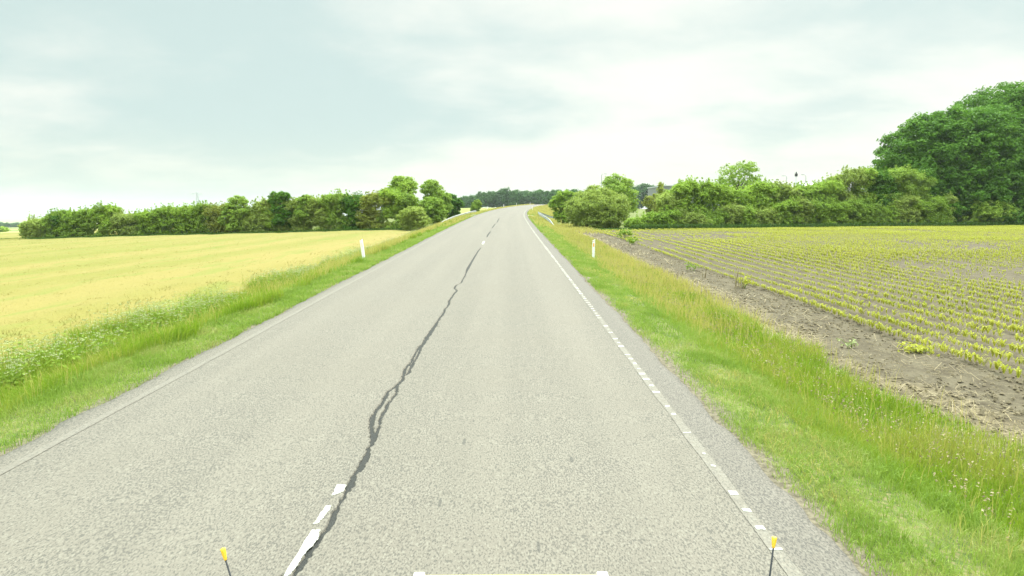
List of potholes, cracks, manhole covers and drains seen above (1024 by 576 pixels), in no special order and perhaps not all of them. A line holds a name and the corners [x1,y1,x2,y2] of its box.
crack [293,219,499,576]
